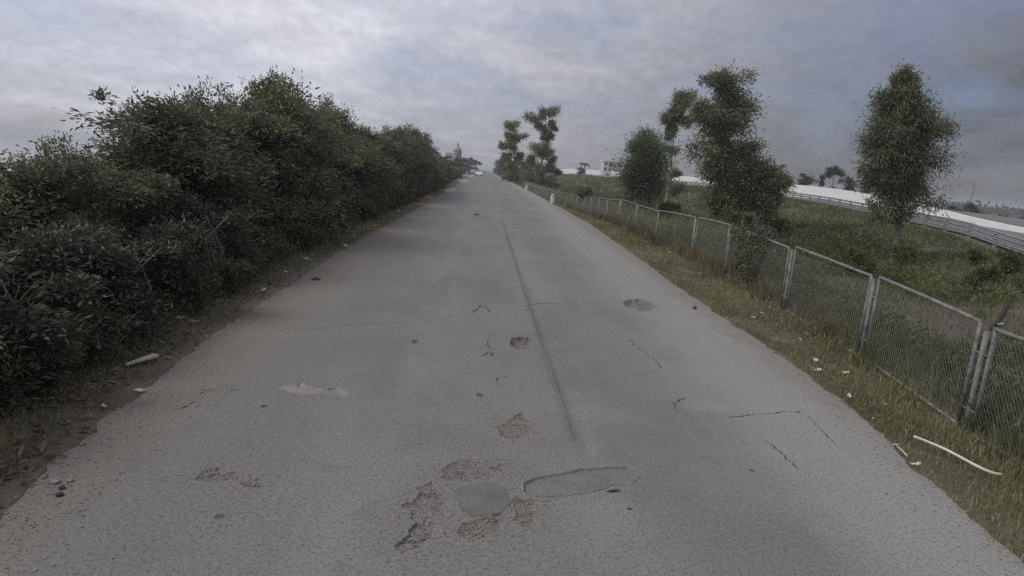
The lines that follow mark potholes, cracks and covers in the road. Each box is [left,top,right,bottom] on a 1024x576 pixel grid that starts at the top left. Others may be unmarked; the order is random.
pothole [457,513,504,539]
crack [765,440,800,470]
pothole [623,299,656,311]
pothole [494,411,535,439]
pothole [193,467,266,491]
pothole [394,481,447,554]
pothole [512,496,538,528]
pothole [510,337,533,350]
pothole [440,457,515,482]
crack [732,411,836,444]
